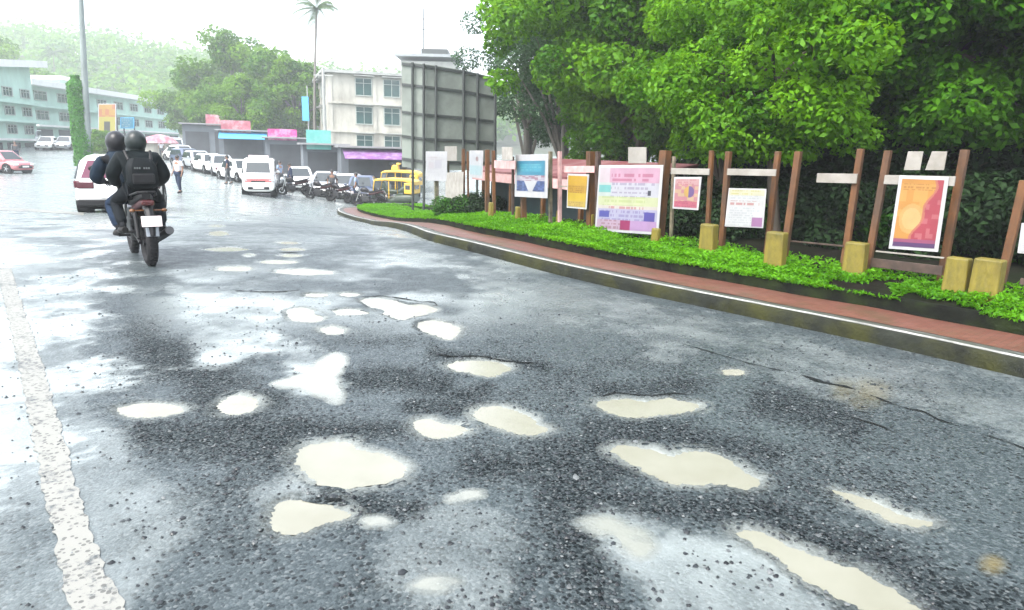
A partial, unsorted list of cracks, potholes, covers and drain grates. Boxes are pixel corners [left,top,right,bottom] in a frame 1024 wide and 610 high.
pothole [572,513,663,563]
pothole [201,389,278,419]
pothole [353,296,444,322]
crack [801,374,854,389]
pothole [278,433,422,505]
pothole [249,485,367,544]
pothole [715,518,945,610]
pothole [398,413,485,445]
pothole [102,397,201,422]
pothole [595,438,780,497]
pothole [580,393,716,422]
pothole [268,351,351,406]
